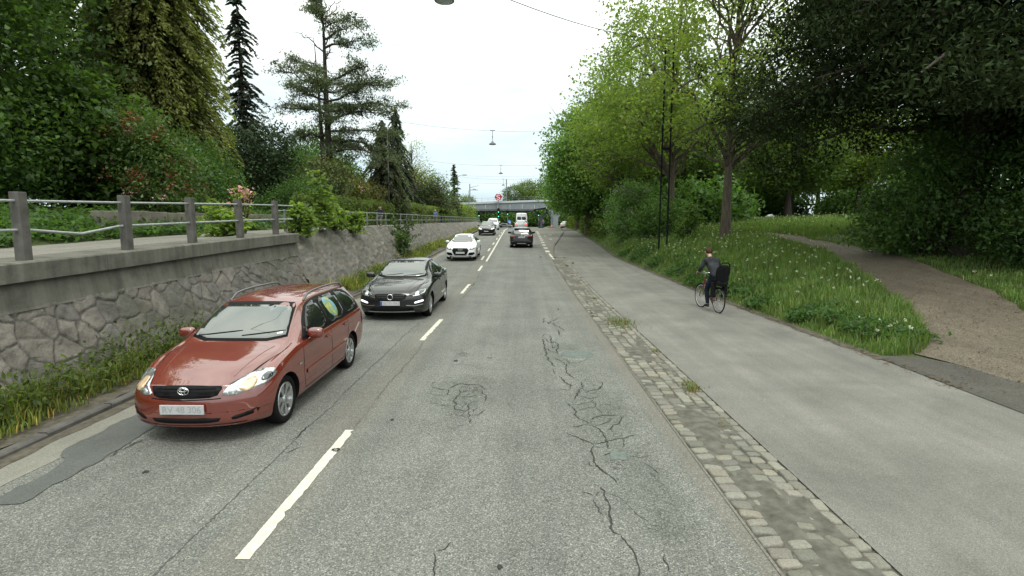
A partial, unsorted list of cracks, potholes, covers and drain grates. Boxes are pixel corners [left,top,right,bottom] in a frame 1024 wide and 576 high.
crack [430,347,490,426]
crack [542,317,660,576]
